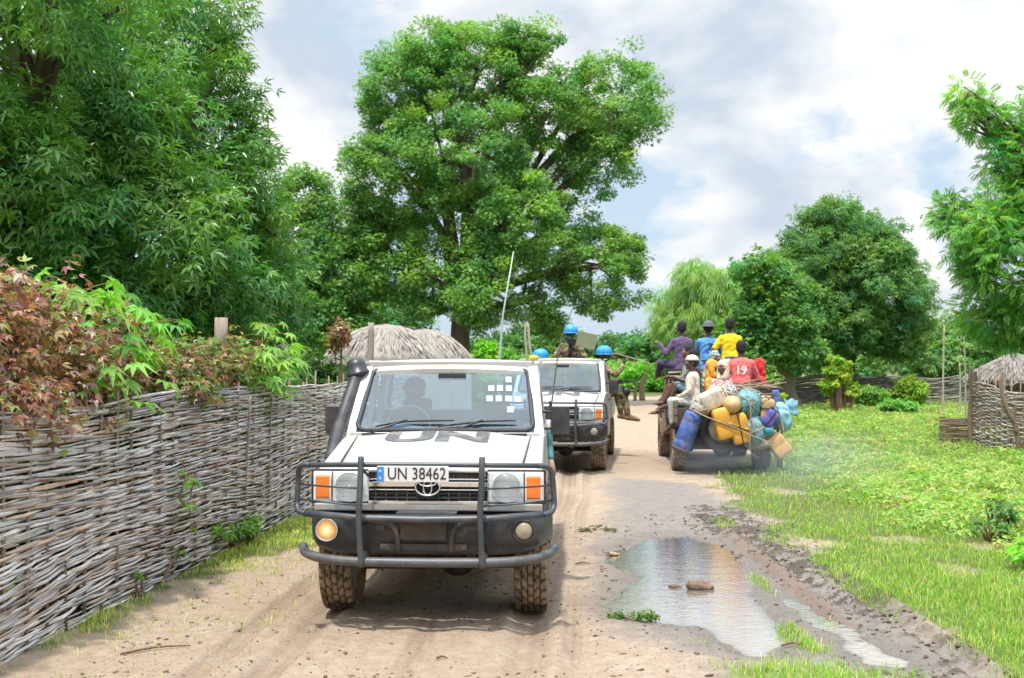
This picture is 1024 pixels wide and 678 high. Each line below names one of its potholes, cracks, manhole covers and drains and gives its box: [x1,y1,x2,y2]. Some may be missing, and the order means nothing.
pothole [576,530,814,662]
